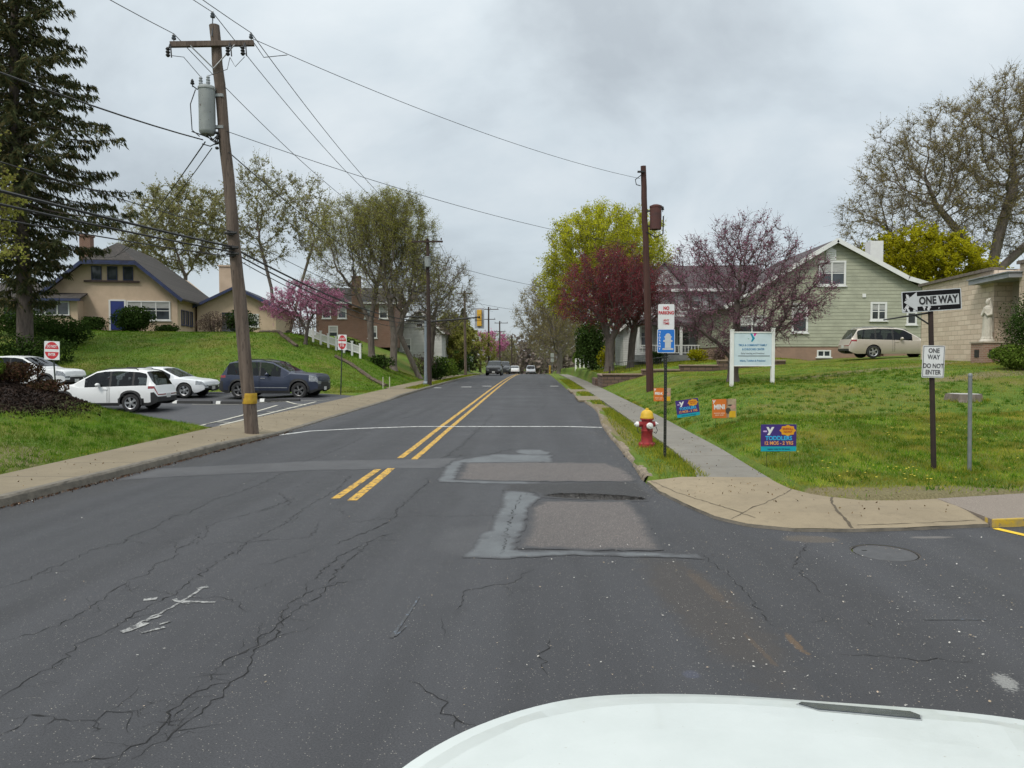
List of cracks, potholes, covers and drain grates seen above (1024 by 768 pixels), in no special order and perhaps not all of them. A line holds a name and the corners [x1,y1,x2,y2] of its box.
crack [415,682,485,730]
crack [1,478,429,767]
manhole cover [850,545,921,562]
